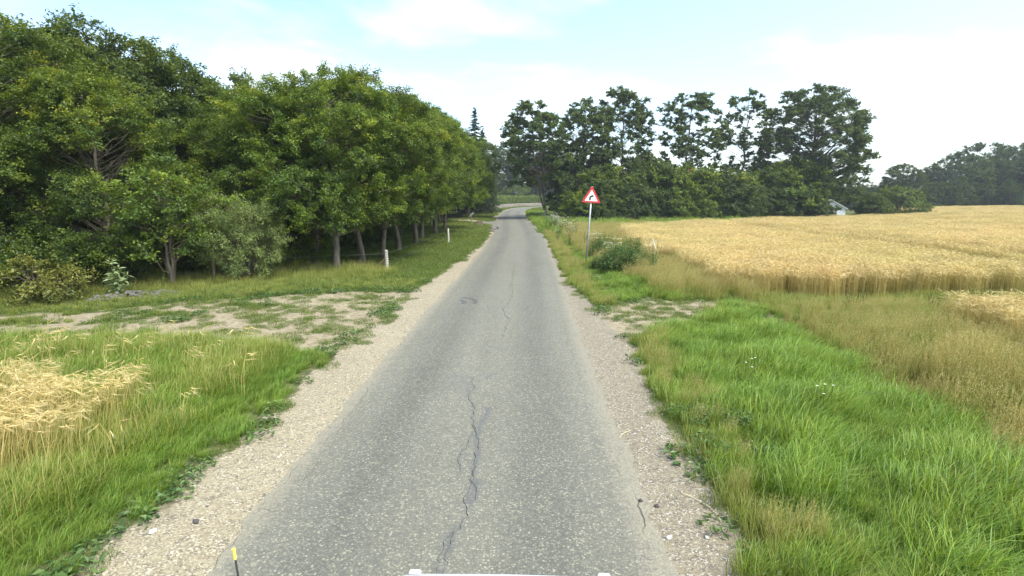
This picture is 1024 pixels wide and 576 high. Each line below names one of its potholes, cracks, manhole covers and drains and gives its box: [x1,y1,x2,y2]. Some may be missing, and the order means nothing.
crack [635,495,646,533]
crack [436,379,479,574]
